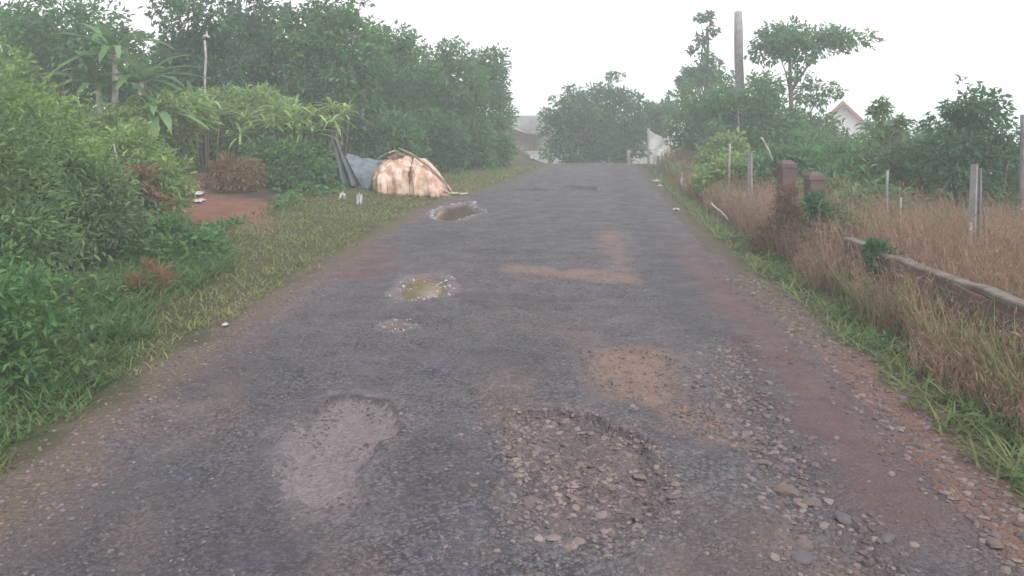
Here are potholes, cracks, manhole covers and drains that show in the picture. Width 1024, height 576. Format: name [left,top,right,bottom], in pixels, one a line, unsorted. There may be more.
pothole [384,273,462,303]
pothole [426,201,488,222]
pothole [373,318,422,334]
pothole [482,405,692,558]
pothole [256,391,415,518]
